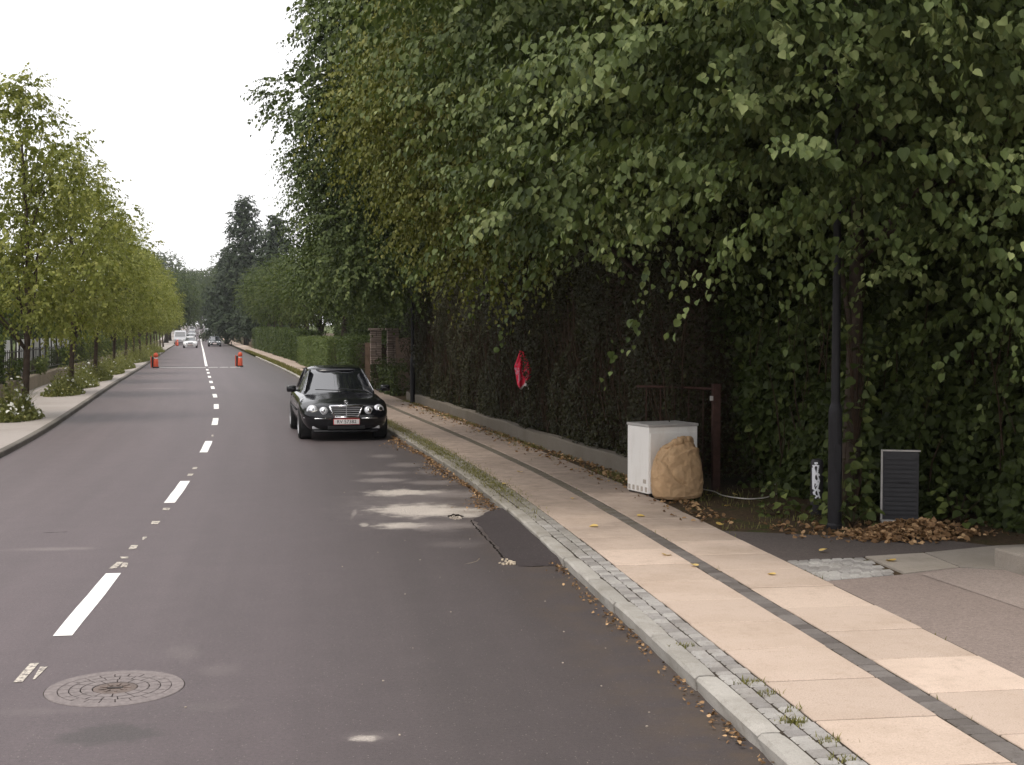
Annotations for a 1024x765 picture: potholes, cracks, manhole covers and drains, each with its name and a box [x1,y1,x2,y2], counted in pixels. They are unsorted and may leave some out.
manhole cover [44,670,184,707]
